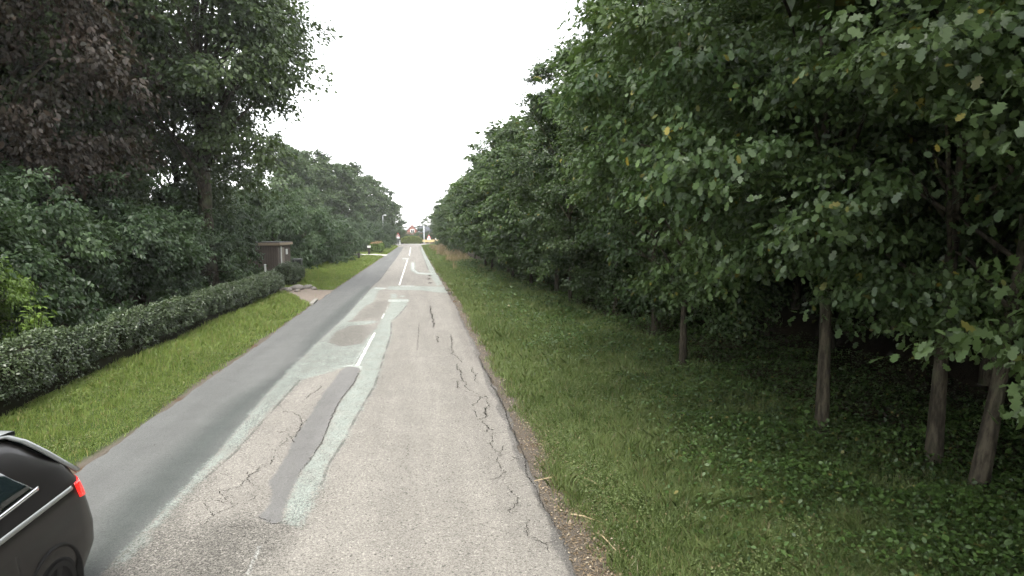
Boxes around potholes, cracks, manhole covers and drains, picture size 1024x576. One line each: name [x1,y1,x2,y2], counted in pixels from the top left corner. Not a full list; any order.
crack [201,386,321,528]
crack [417,309,570,557]
